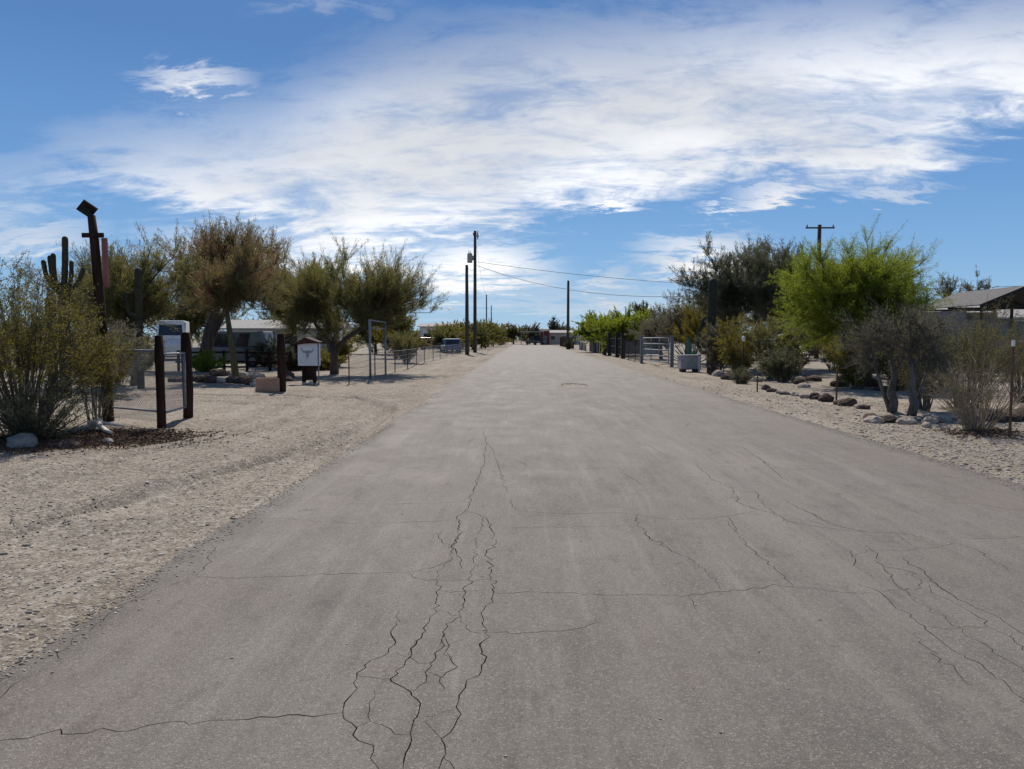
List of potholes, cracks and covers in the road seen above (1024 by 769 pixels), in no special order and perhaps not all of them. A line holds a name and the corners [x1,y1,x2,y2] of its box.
crack [510,443,1024,703]
crack [0,438,877,769]
